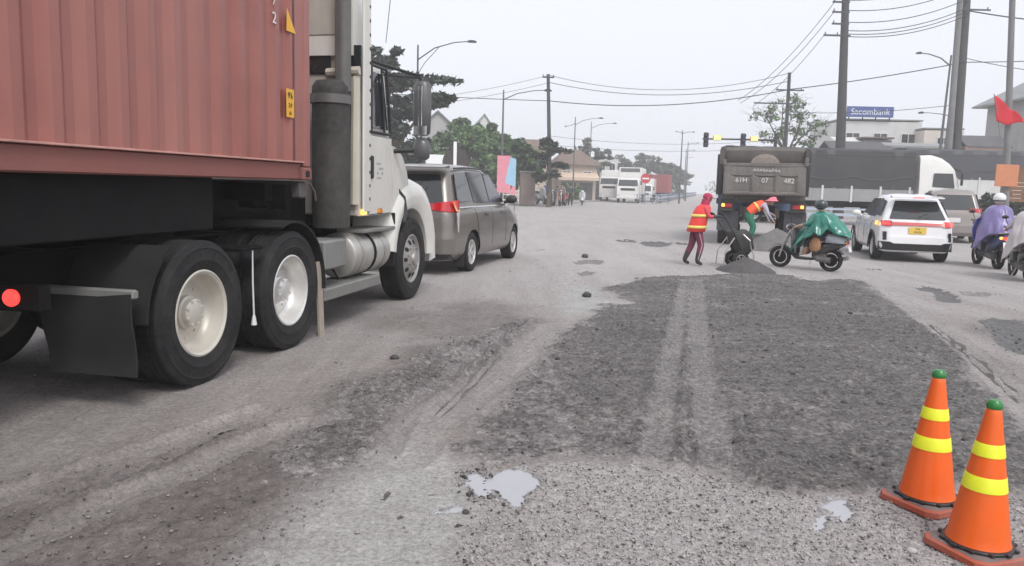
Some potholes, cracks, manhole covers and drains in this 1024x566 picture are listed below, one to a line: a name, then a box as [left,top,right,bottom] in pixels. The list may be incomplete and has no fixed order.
pothole [813,494,857,533]
pothole [465,471,499,499]
pothole [978,318,1024,355]
pothole [492,464,543,508]
pothole [914,286,961,303]
